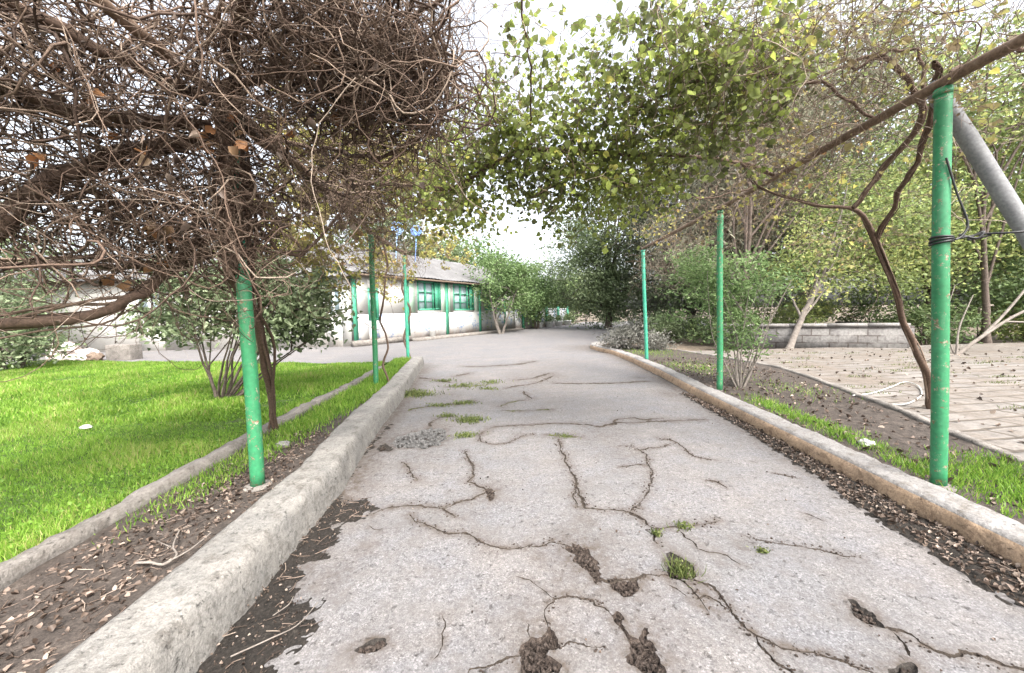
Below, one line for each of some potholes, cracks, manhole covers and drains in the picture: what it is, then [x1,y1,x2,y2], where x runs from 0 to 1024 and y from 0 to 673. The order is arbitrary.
pothole [848,599,885,628]
pothole [355,638,388,654]
pothole [609,581,640,597]
pothole [390,427,447,449]
pothole [519,626,562,673]
pothole [611,611,667,673]
crack [371,361,1024,673]
pothole [565,543,602,584]
